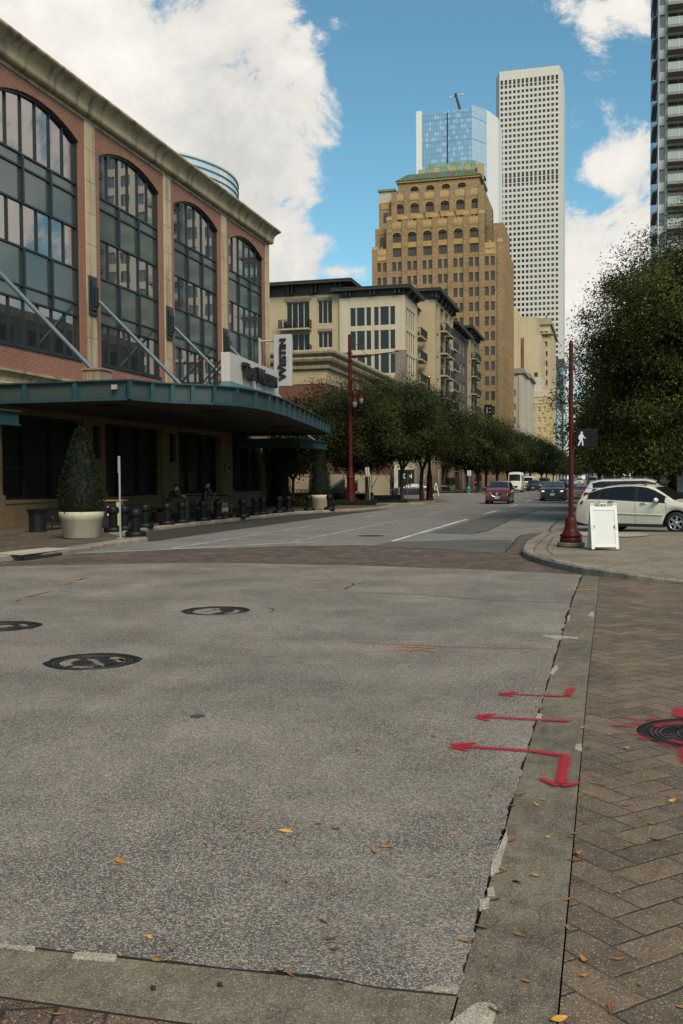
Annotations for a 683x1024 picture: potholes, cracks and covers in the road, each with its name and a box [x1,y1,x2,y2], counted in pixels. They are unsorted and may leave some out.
manhole cover [43,654,142,670]
manhole cover [0,622,42,632]
manhole cover [637,719,683,748]
manhole cover [182,607,250,615]
